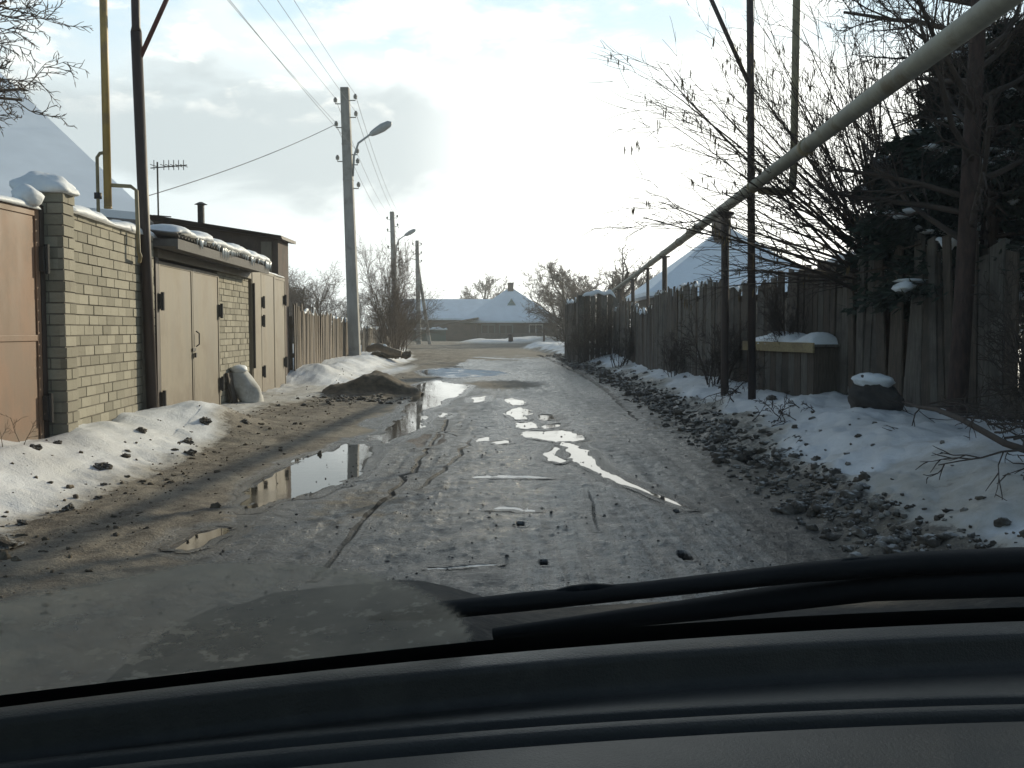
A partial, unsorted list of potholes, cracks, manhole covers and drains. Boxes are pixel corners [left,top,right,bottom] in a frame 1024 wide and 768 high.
pothole [349,380,477,446]
crack [583,489,605,532]
pothole [229,442,385,514]
pothole [159,526,239,553]
crack [302,419,566,582]
